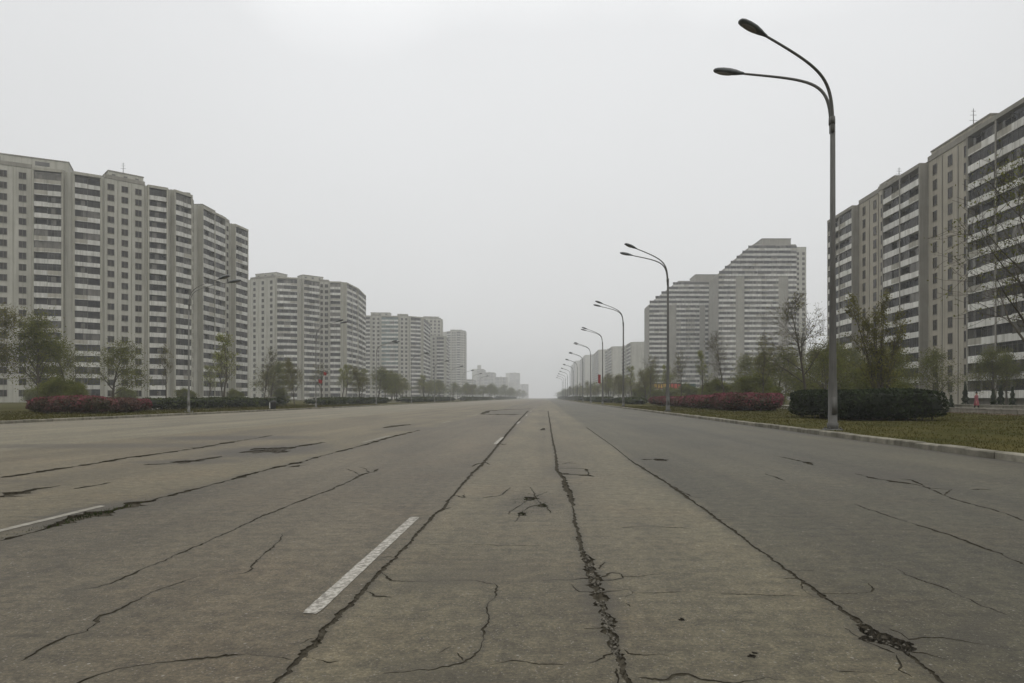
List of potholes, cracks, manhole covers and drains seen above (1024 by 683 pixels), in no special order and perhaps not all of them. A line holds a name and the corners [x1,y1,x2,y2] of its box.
crack [21,467,378,683]
crack [0,435,323,497]
pothole [856,624,917,656]
crack [389,411,786,683]
crack [855,474,1024,565]
